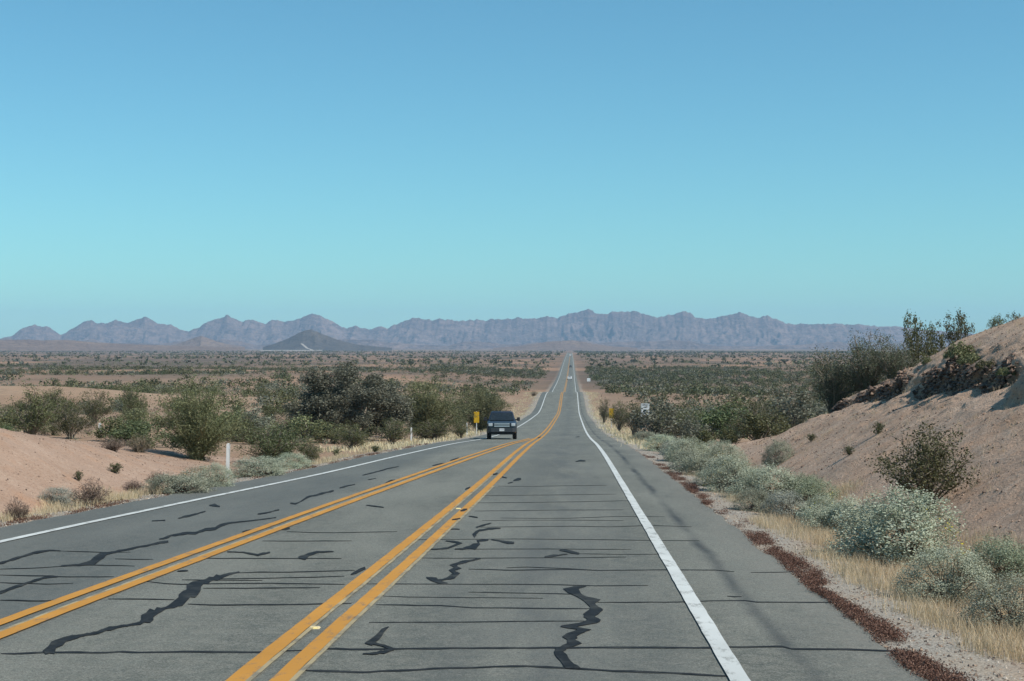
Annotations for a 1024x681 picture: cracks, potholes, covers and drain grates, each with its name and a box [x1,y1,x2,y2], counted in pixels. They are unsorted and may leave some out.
crack [1,473,895,677]
